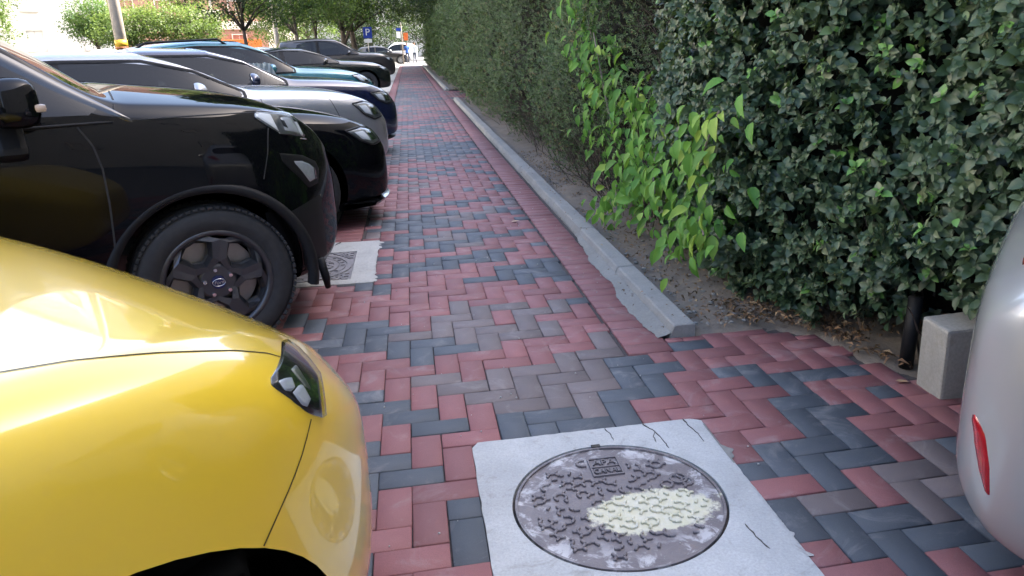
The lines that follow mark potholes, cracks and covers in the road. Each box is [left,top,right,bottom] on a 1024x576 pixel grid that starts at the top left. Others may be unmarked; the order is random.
manhole cover [293,240,384,289]
crack [642,419,704,448]
manhole cover [472,419,824,576]
